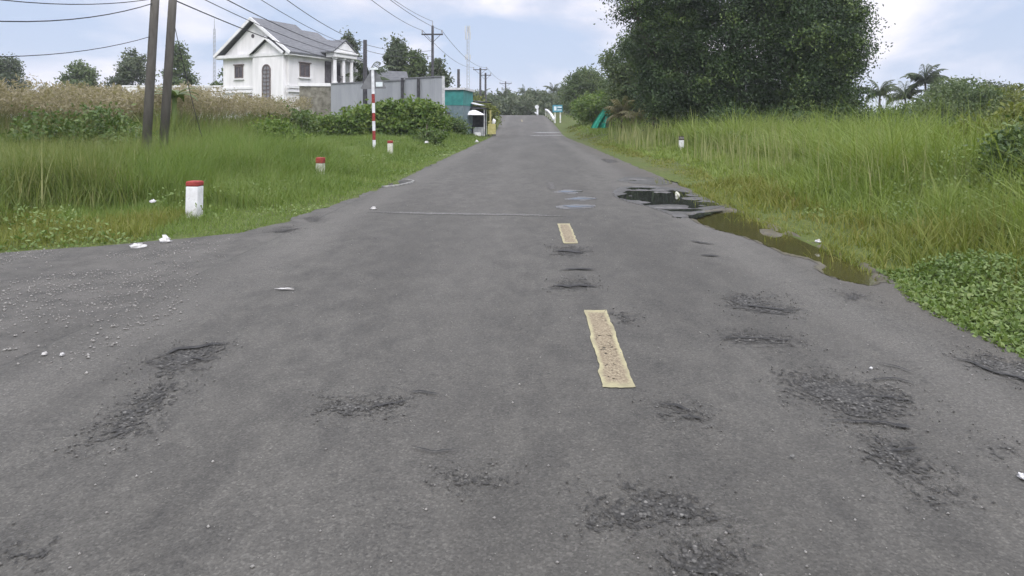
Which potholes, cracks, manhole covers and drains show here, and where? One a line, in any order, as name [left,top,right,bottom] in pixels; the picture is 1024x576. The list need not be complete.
pothole [716,291,810,315]
pothole [550,277,599,291]
pothole [133,342,234,378]
pothole [571,472,763,548]
pothole [647,394,723,428]
pothole [845,425,955,491]
pothole [424,459,522,502]
pothole [686,208,889,286]
pothole [715,326,813,352]
pothole [613,186,737,219]
pothole [944,346,1024,385]
